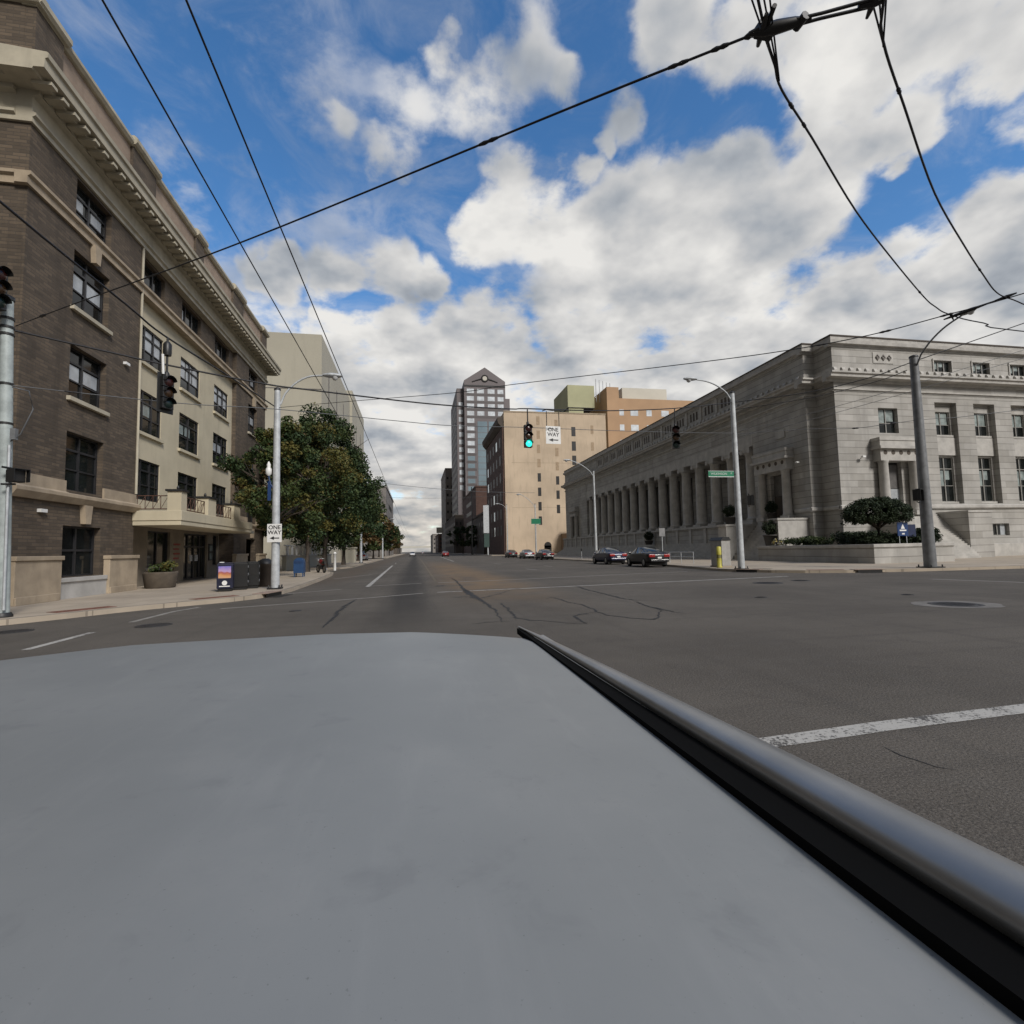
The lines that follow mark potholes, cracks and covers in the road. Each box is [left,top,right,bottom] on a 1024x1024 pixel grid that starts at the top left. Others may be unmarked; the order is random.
crack [323,599,357,627]
crack [452,578,679,624]
